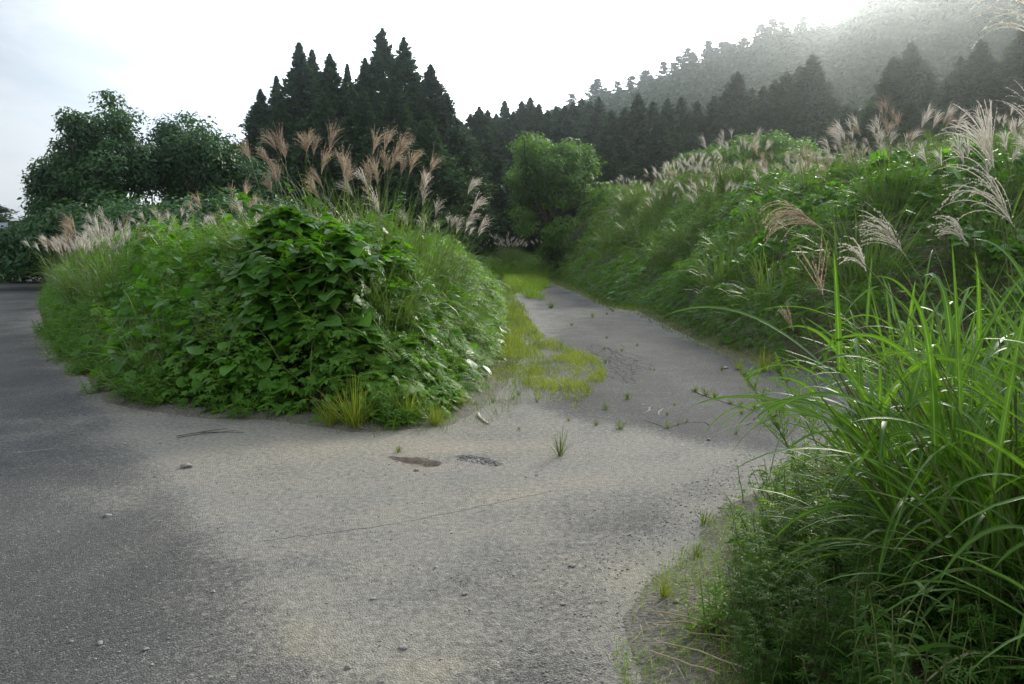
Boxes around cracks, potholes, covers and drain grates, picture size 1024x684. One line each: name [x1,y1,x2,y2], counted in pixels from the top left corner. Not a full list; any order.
pothole [387,456,442,468]
crack [267,490,553,541]
pothole [453,455,505,467]
